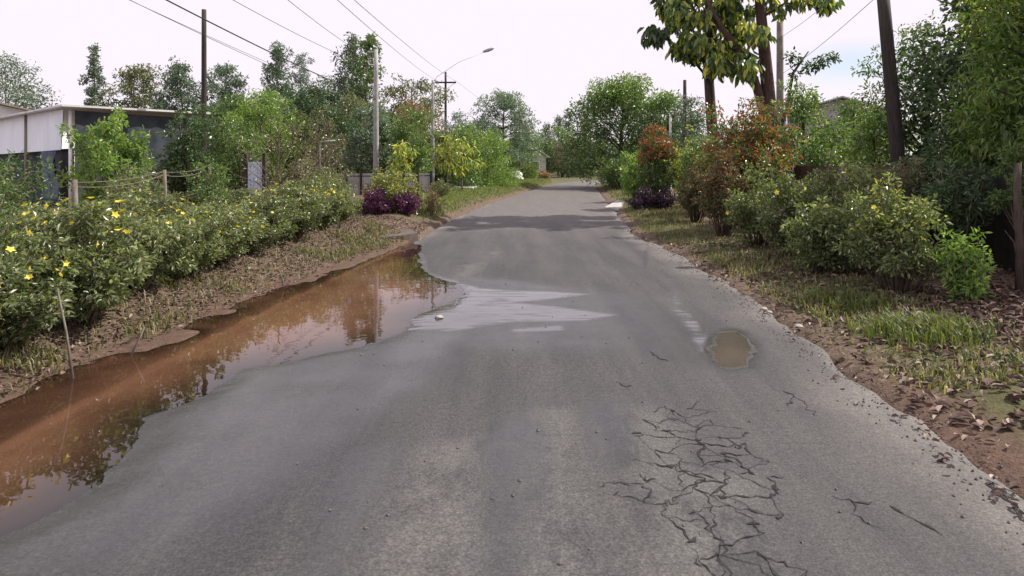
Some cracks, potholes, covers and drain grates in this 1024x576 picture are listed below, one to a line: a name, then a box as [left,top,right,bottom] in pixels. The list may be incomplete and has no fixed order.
pothole [705,330,757,370]
crack [600,401,808,576]
crack [834,496,942,535]
